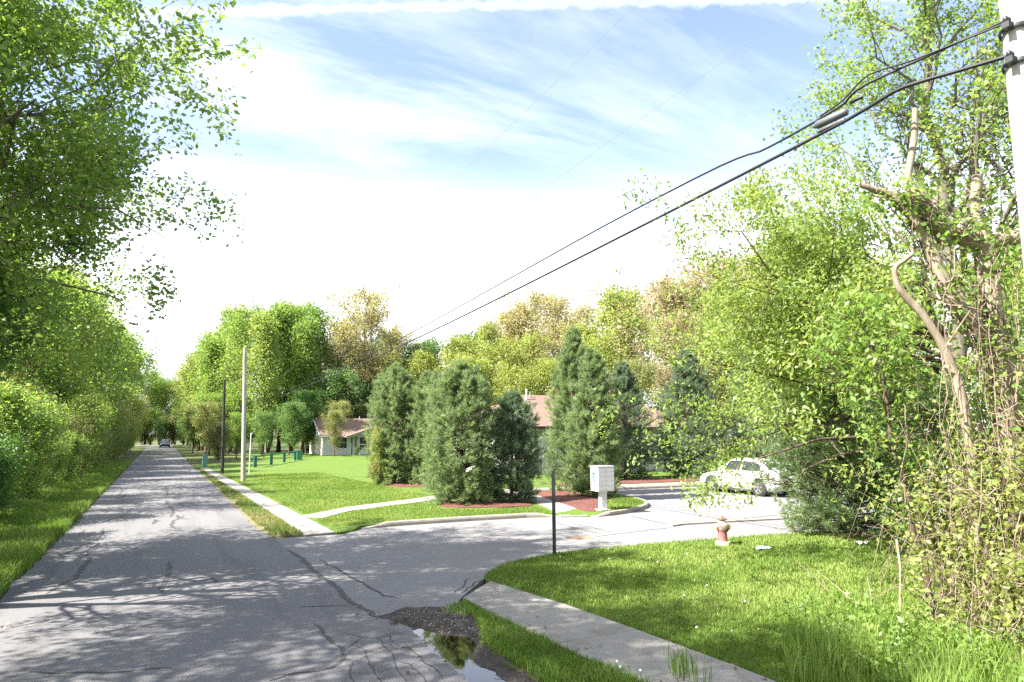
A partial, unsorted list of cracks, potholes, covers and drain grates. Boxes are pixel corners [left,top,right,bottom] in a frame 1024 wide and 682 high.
pothole [379,601,534,682]
crack [270,624,442,682]
crack [48,487,192,593]
crack [158,561,218,593]
